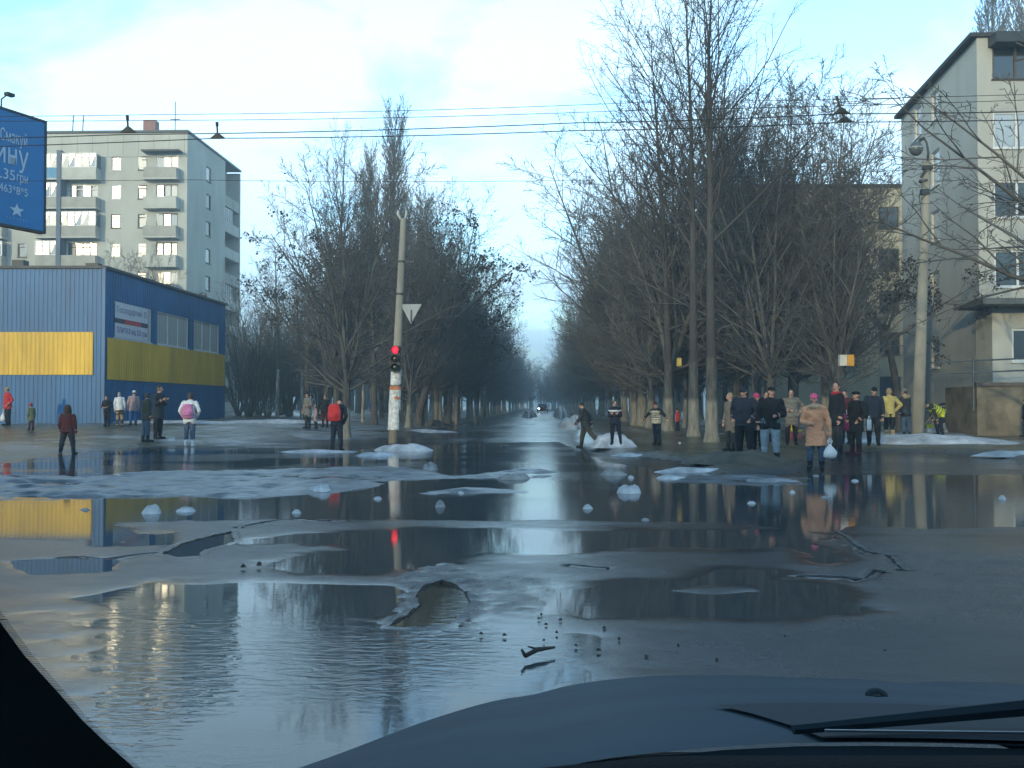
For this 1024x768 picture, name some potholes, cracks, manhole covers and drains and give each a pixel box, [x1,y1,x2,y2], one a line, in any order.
pothole [153,531,241,559]
crack [802,531,910,582]
pothole [380,580,480,632]
